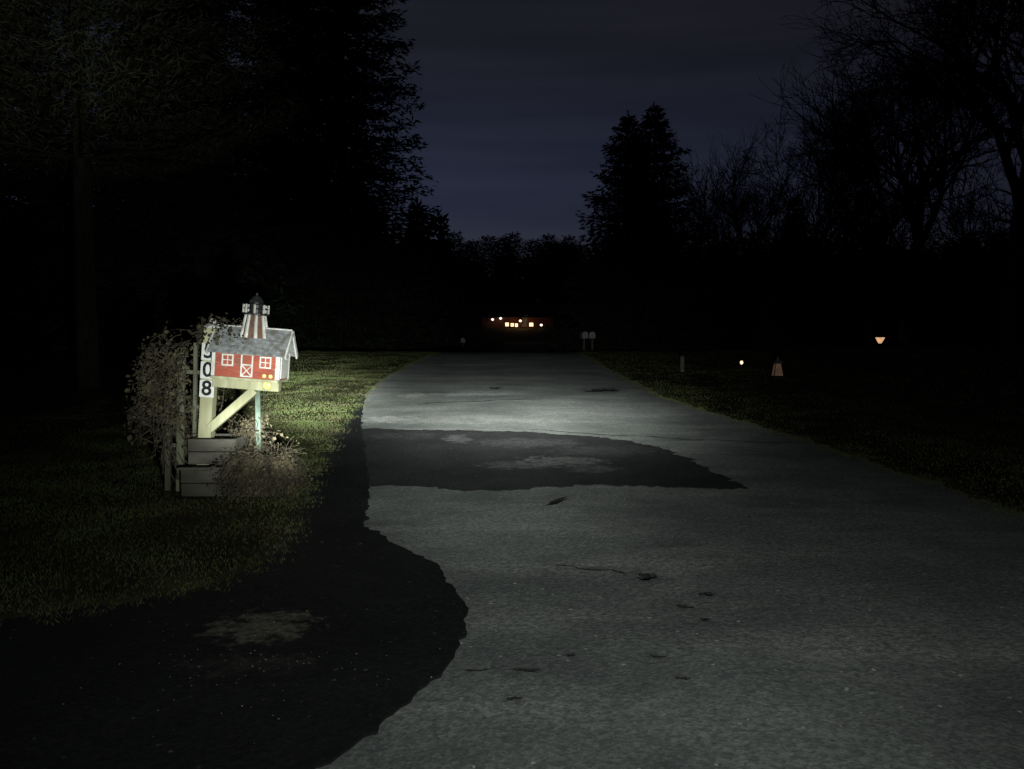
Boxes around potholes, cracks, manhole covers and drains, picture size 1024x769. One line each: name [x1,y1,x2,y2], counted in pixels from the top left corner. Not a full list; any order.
crack [541,564,627,575]
pothole [637,573,657,581]
